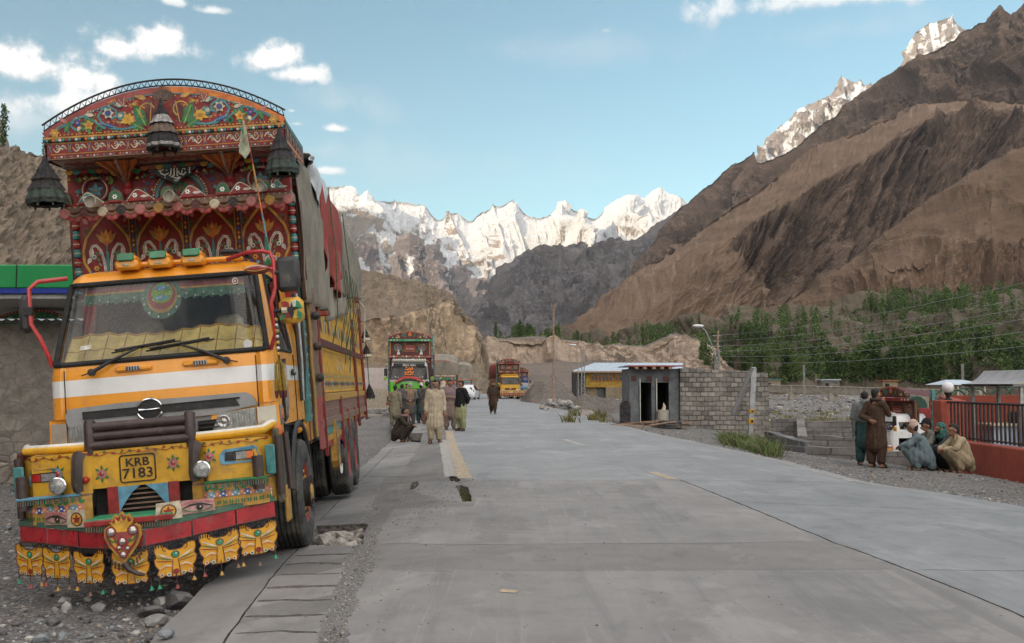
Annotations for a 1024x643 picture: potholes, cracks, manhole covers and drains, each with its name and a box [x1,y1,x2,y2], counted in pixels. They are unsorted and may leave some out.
pothole [456,485,472,502]
pothole [308,523,368,554]
